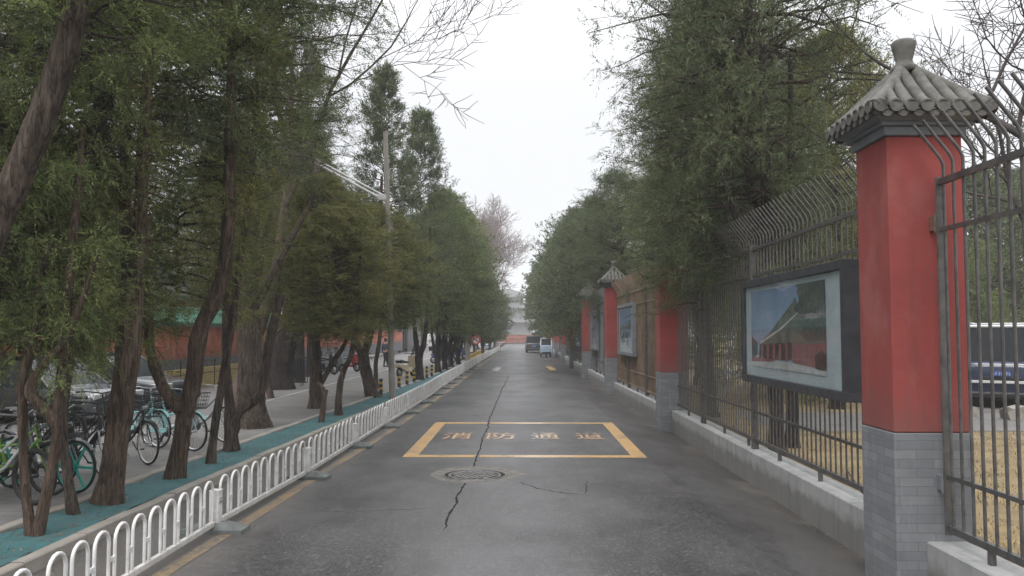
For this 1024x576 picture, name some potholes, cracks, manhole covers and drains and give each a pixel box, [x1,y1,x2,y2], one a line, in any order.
crack [364,376,509,531]
manhole cover [431,466,529,483]
